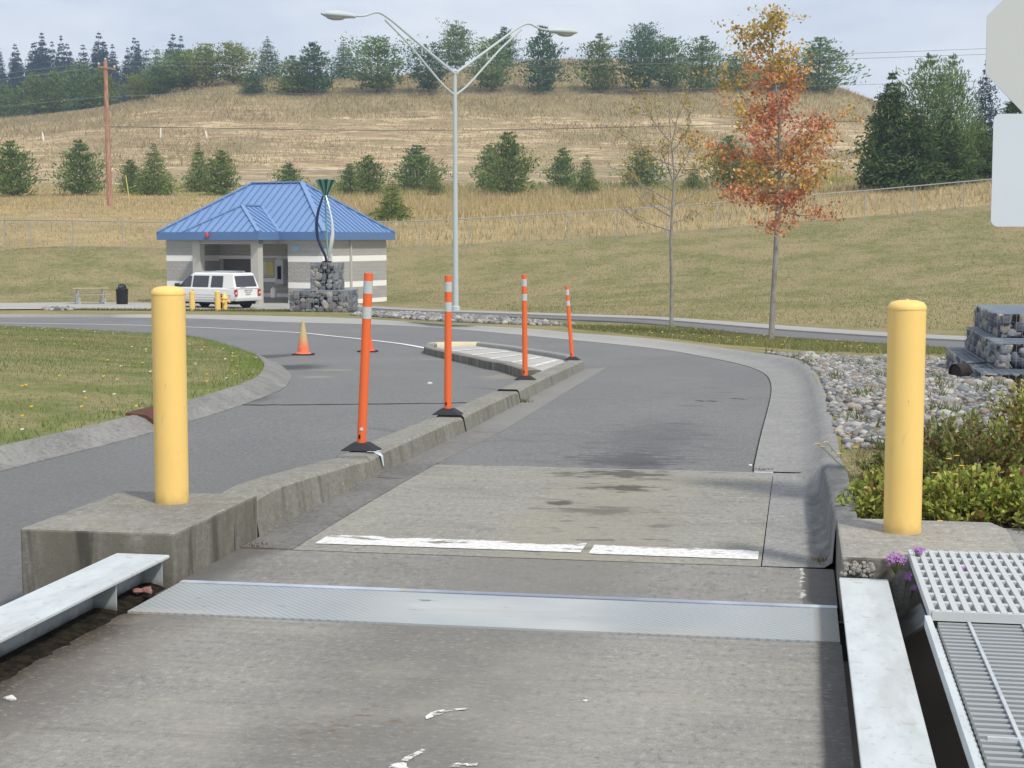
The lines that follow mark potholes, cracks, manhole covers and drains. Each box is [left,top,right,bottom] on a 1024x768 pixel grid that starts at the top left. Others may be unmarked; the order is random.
drain grate [924,615,1024,768]
drain grate [908,549,1024,624]
